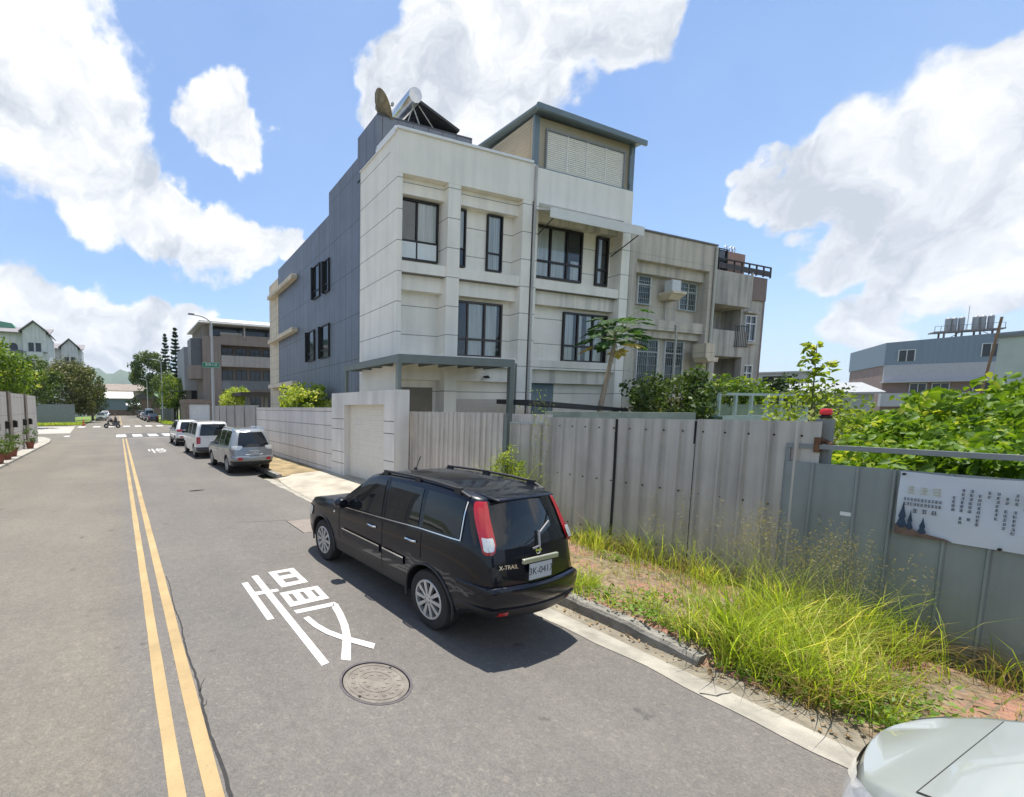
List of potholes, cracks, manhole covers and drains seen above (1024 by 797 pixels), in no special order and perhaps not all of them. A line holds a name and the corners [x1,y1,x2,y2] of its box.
crack [166,576,233,797]
manhole cover [339,661,413,705]
